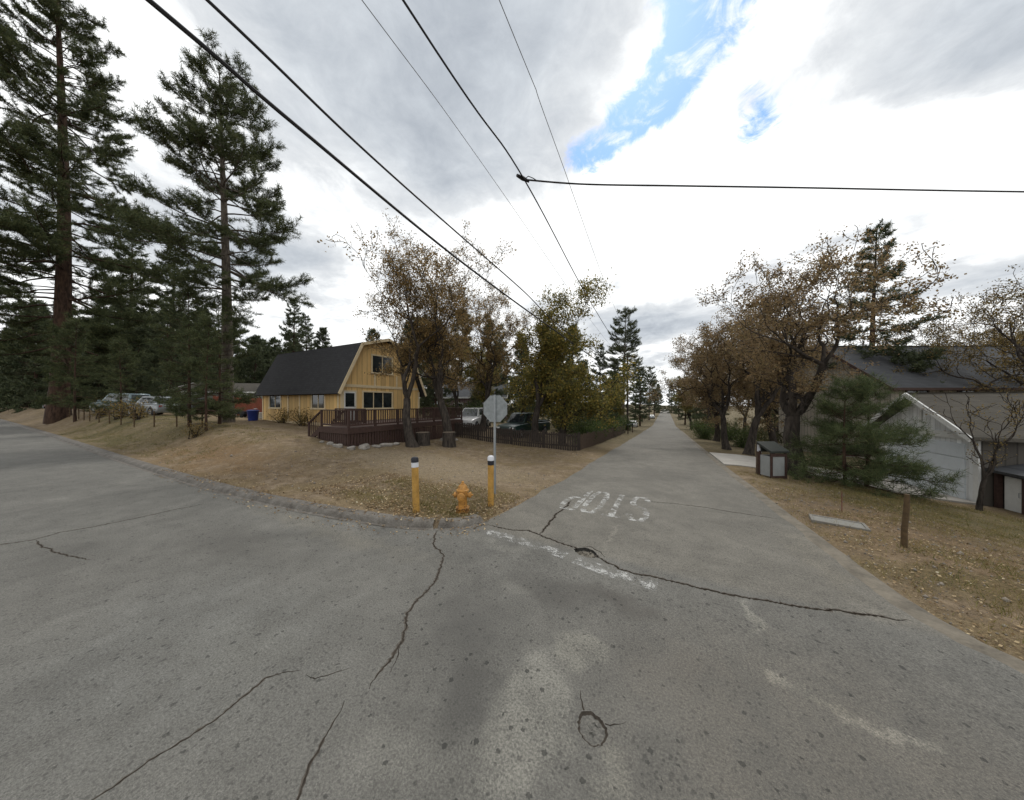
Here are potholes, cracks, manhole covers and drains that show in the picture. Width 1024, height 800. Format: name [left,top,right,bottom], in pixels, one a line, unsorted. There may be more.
pothole [577,711,608,747]
crack [490,500,911,621]
crack [91,531,445,800]
crack [0,504,202,560]
pothole [574,547,598,558]
